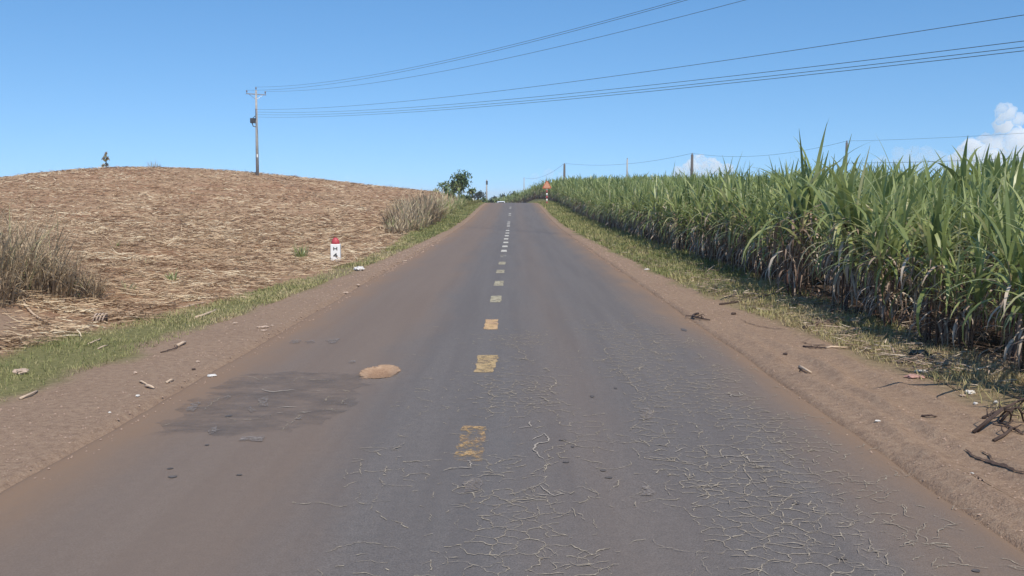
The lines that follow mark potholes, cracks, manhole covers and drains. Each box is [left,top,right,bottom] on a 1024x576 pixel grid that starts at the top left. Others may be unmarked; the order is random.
crack [204,377,347,429]
crack [293,316,1022,576]
